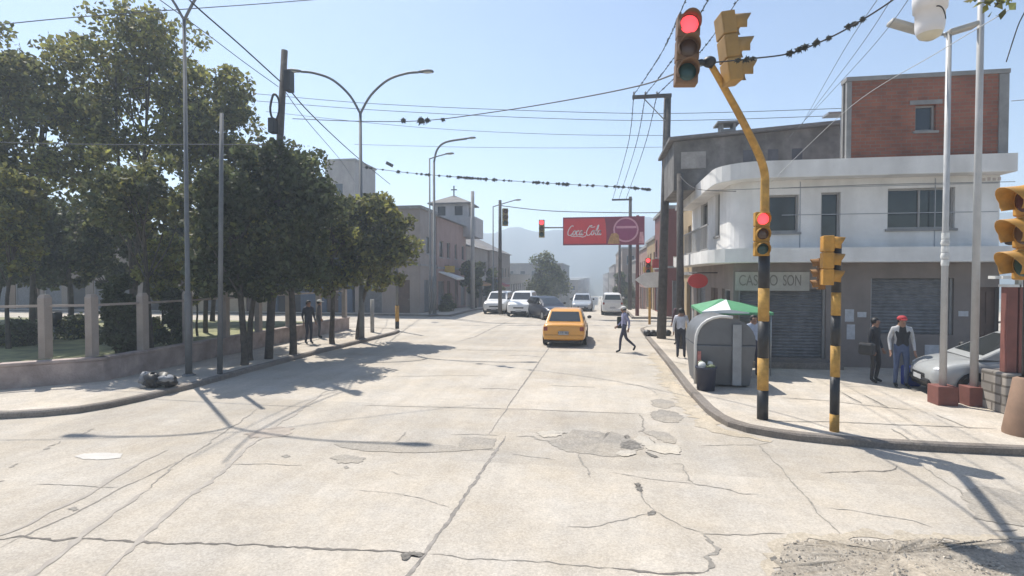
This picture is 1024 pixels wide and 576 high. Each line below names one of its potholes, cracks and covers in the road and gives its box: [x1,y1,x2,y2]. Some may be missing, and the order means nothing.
crack [2,409,405,553]
pothole [771,537,1024,576]
crack [759,440,932,534]
pothole [549,429,644,457]
